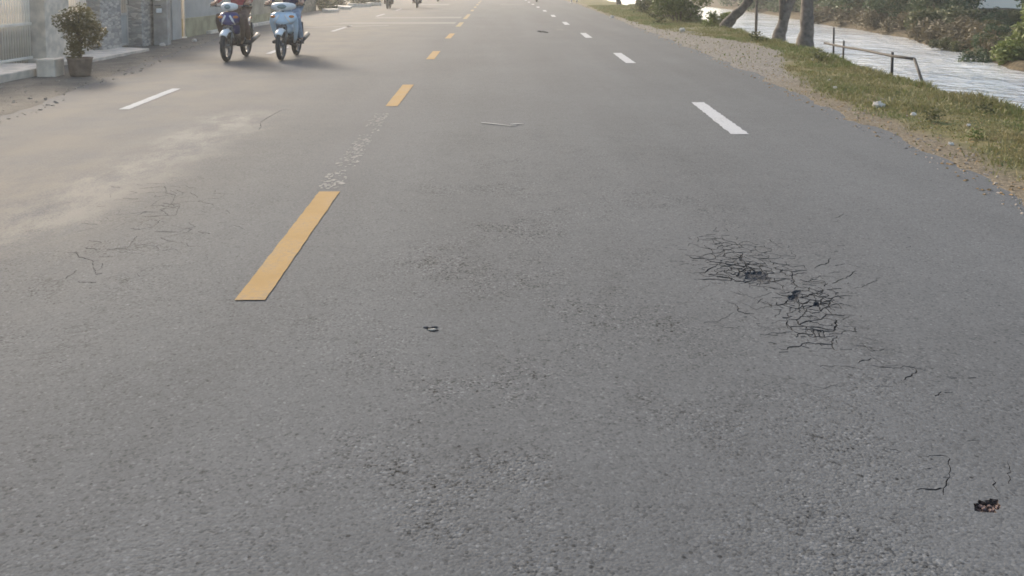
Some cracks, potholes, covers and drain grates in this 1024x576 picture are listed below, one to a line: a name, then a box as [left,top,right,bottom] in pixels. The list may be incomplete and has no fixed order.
crack [890,440,1011,495]
pothole [973,498,1001,513]
crack [62,178,243,283]
